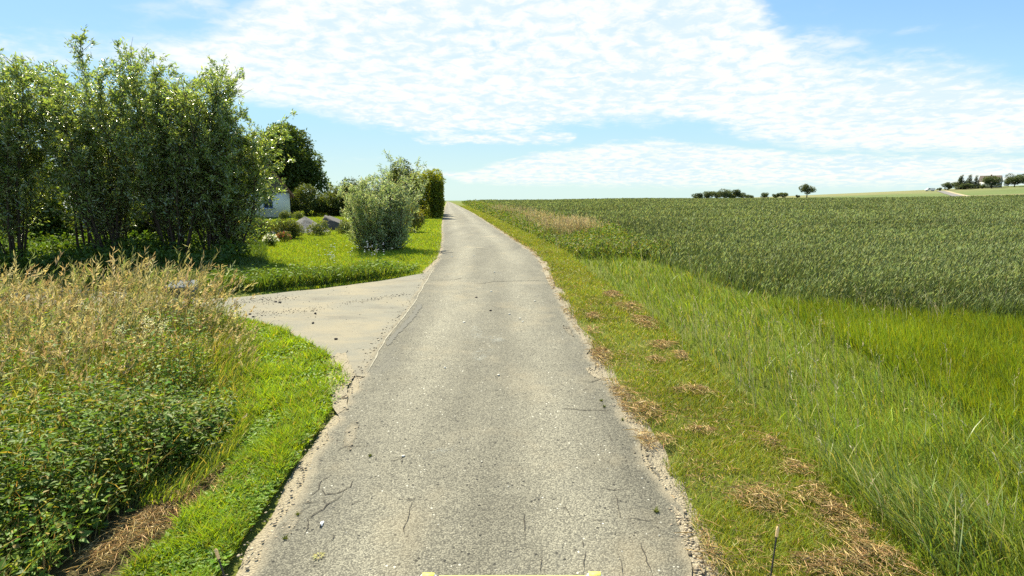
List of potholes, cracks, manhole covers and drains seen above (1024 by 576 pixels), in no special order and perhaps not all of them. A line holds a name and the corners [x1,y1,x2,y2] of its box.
crack [300,478,362,541]
